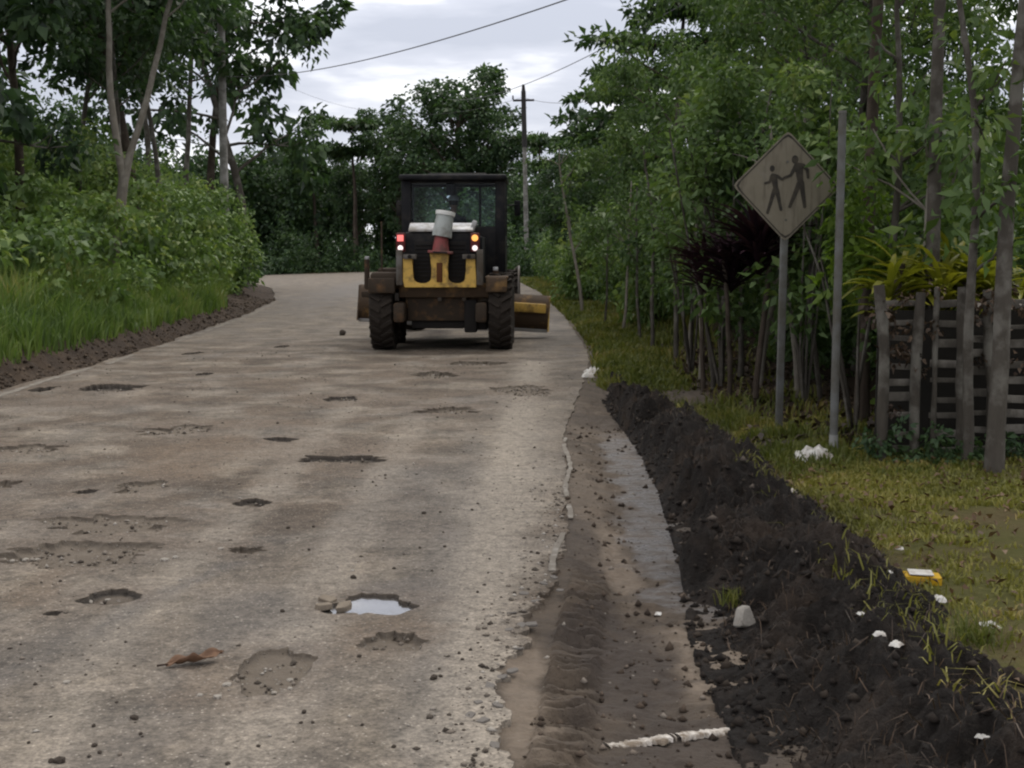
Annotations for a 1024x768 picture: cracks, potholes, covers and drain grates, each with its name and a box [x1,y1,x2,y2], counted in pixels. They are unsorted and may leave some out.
pothole [298,455,389,464]
pothole [355,630,430,652]
pothole [232,498,273,508]
pothole [75,588,143,605]
pothole [229,546,268,554]
pothole [320,592,420,615]
pothole [0,443,68,454]
pothole [76,383,149,392]
pothole [114,480,170,494]
pothole [228,647,318,697]
pothole [411,406,481,414]
pothole [136,424,216,436]
